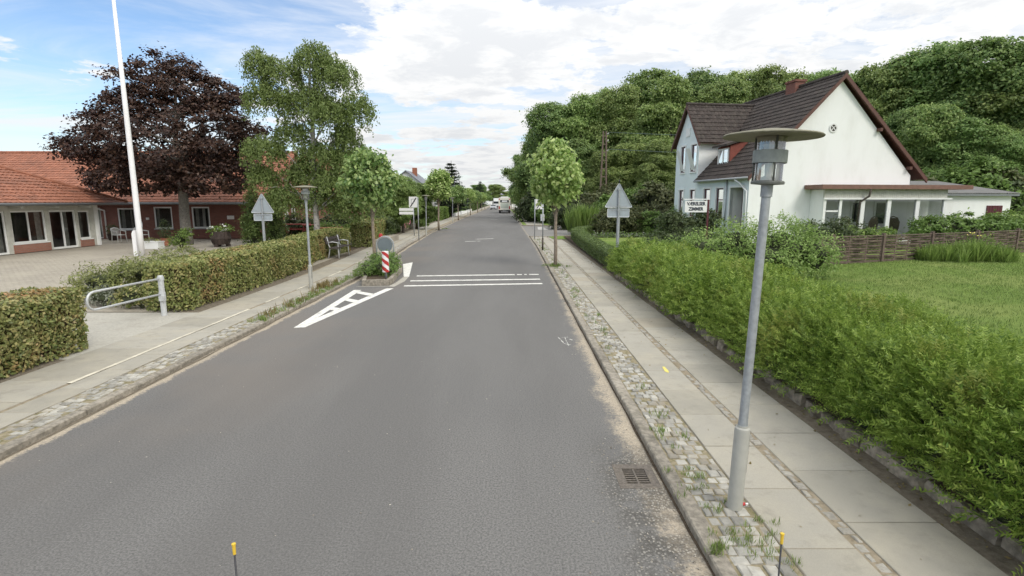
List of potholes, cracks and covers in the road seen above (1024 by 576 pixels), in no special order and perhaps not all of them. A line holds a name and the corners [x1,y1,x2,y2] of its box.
drain grate [611,464,662,488]
